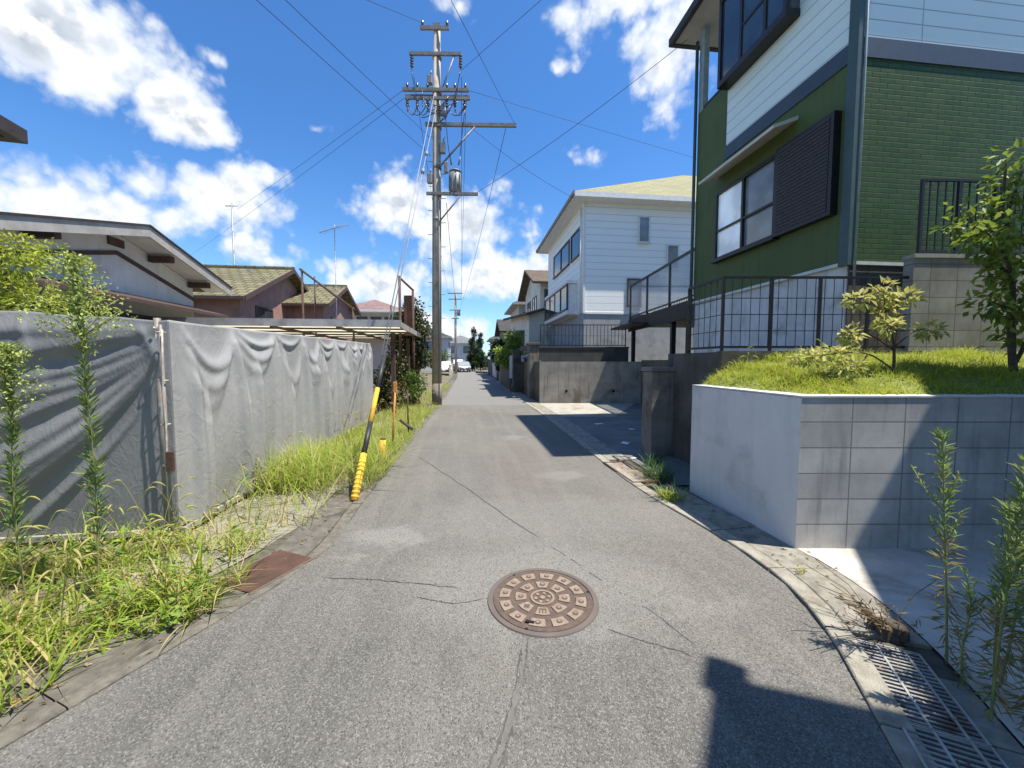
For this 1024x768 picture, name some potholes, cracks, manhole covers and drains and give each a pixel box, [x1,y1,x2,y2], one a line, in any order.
drain grate [855,638,993,747]
drain grate [902,723,1009,768]
crack [610,629,691,656]
manhole cover [487,568,599,638]
crack [323,577,487,604]
